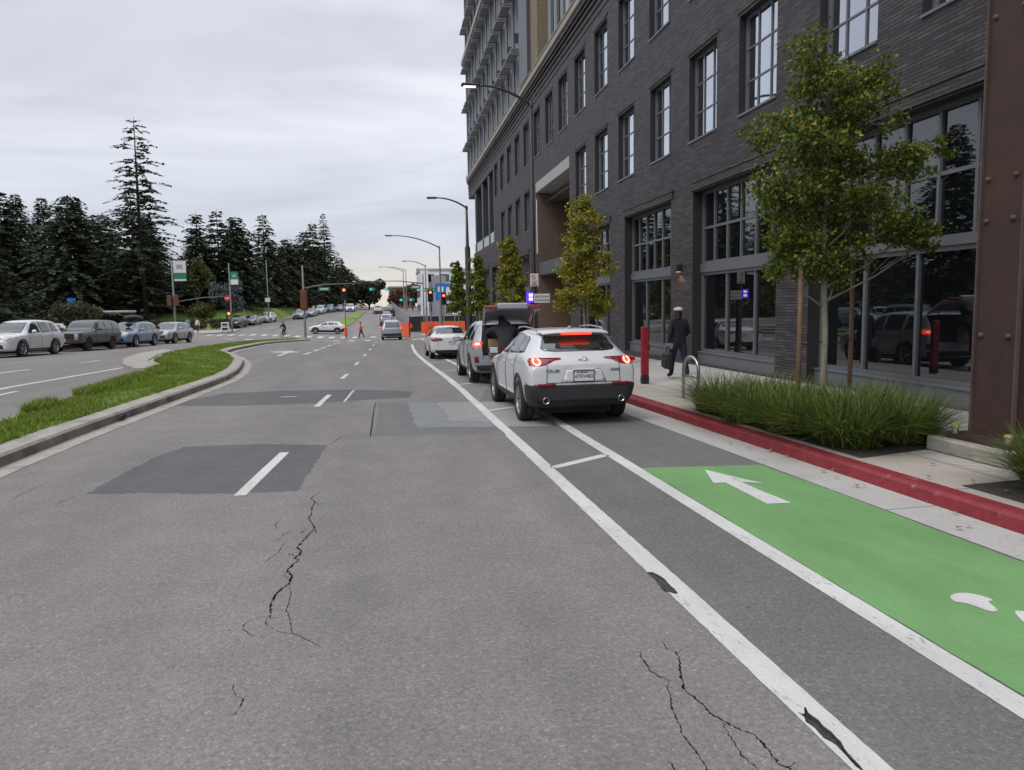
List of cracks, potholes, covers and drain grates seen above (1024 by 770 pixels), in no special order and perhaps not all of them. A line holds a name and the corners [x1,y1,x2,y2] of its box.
pothole [801,708,862,770]
crack [640,642,796,770]
crack [242,496,321,647]
pothole [648,573,677,594]
